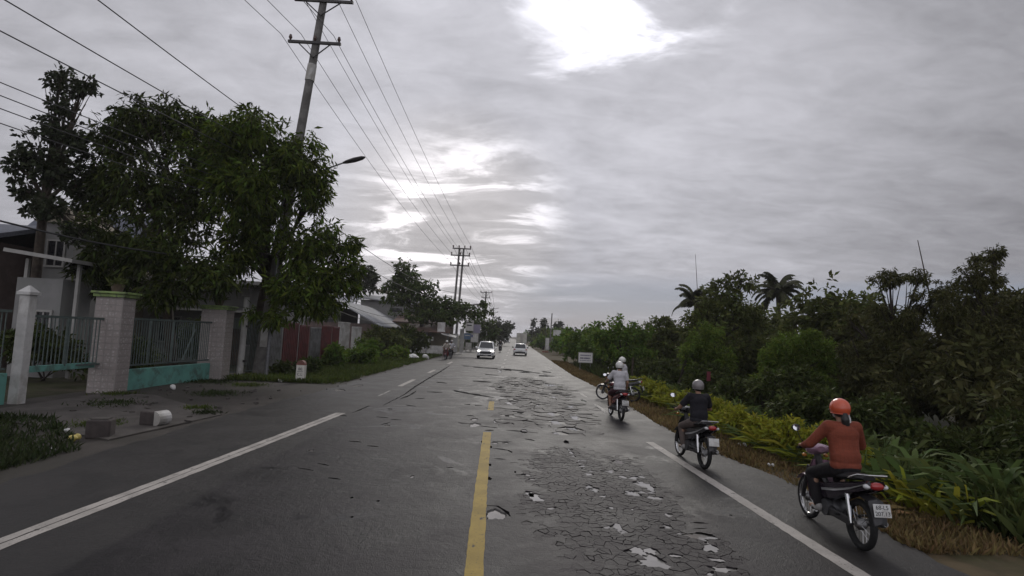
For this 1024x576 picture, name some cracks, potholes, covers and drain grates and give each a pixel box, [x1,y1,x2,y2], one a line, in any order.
pothole [486,508,507,519]
crack [325,366,541,459]
pothole [637,555,671,569]
